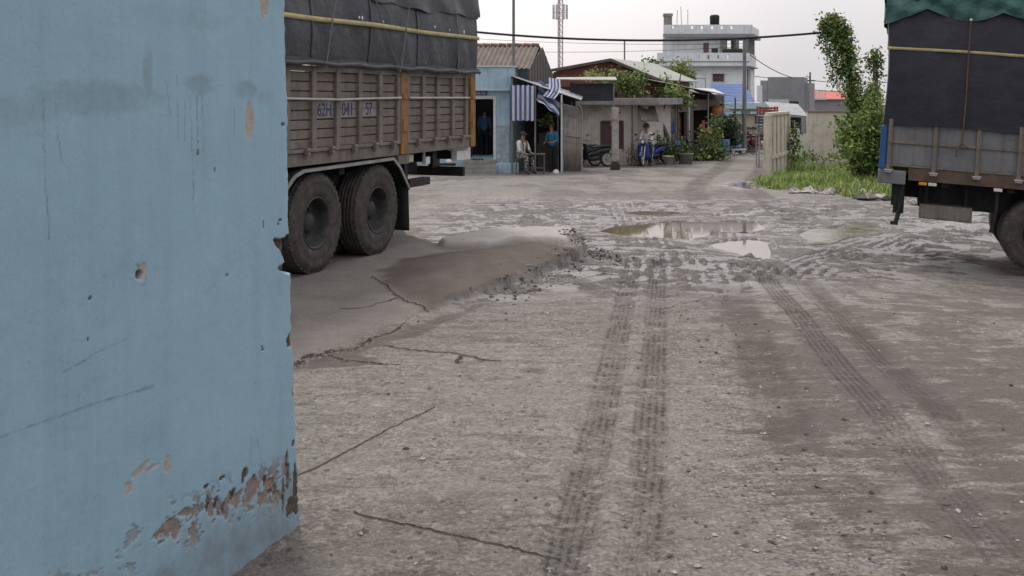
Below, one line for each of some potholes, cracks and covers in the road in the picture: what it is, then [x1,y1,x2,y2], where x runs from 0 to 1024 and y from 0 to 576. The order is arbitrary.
pothole [701,235,779,259]
pothole [586,218,780,241]
crack [293,276,501,369]
crack [298,407,435,476]
crack [354,511,561,561]
